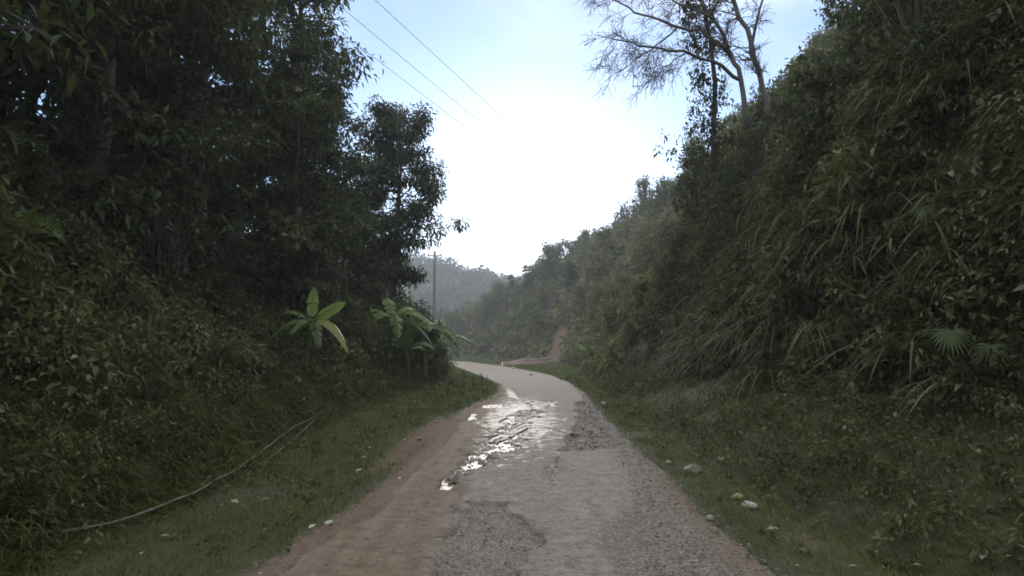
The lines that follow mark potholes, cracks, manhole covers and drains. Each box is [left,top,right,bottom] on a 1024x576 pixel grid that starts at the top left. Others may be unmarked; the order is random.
pothole [433,474,464,491]
pothole [559,401,623,452]
pothole [419,497,550,576]
pothole [440,409,548,485]
